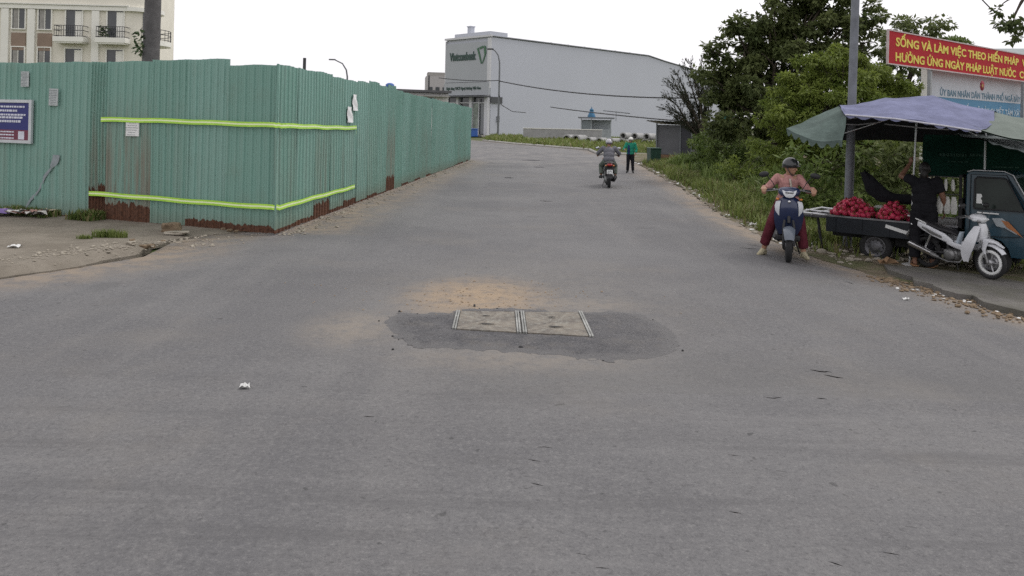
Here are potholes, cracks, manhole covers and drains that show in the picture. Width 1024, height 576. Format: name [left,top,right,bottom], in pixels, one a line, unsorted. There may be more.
manhole cover [452,310,521,334]
manhole cover [520,310,594,337]
